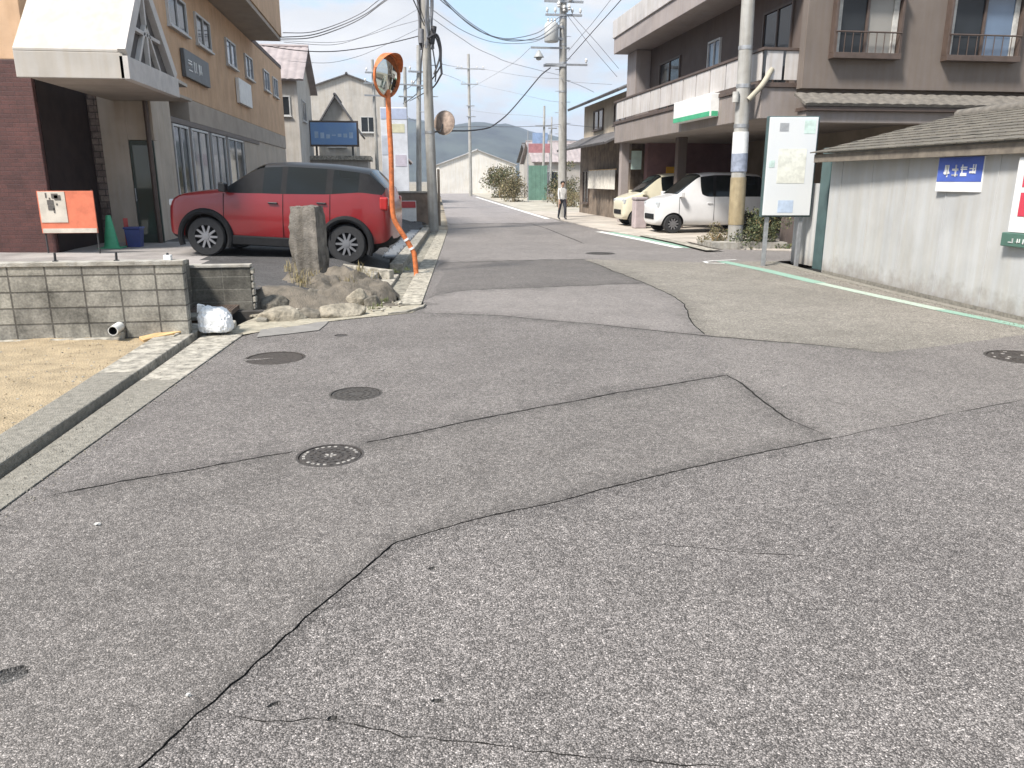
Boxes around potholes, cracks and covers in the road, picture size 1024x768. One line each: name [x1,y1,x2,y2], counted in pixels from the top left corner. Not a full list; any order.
manhole cover [983,350,1024,364]
crack [670,545,851,561]
manhole cover [296,444,364,467]
crack [223,710,762,768]
manhole cover [329,387,382,401]
manhole cover [242,351,306,365]
